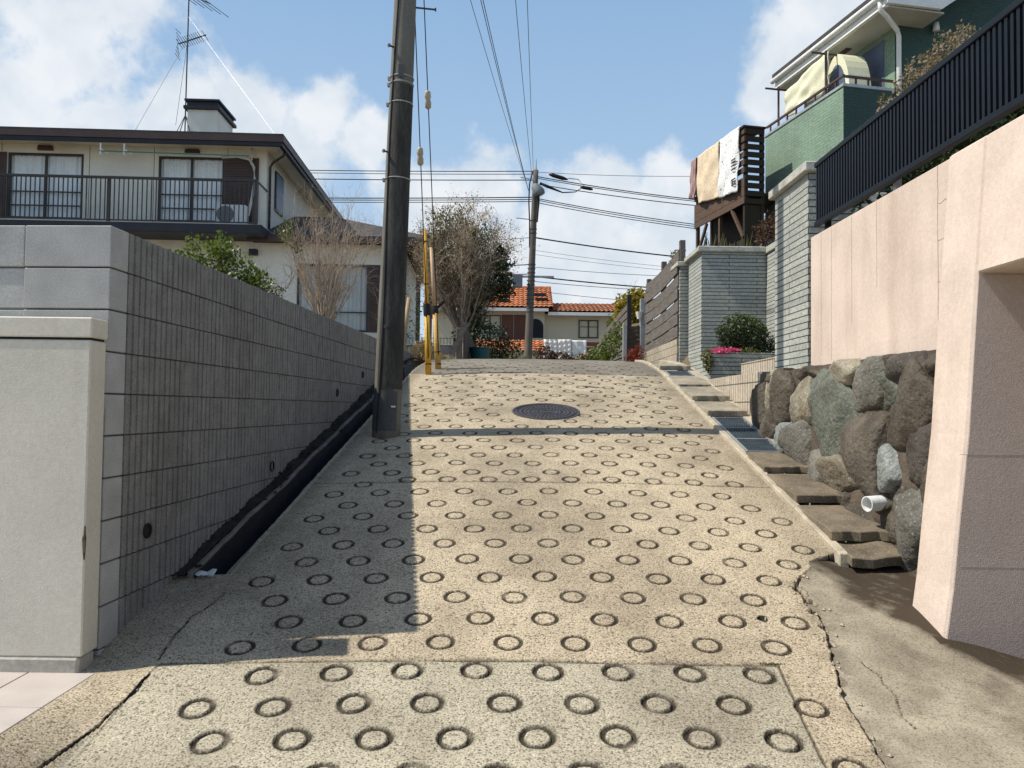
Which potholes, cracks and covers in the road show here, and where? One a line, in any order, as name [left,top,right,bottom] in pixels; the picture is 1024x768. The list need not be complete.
crack [38,603,213,768]
drain grate [712,417,779,452]
crack [789,578,886,767]
manhole cover [512,403,580,420]
